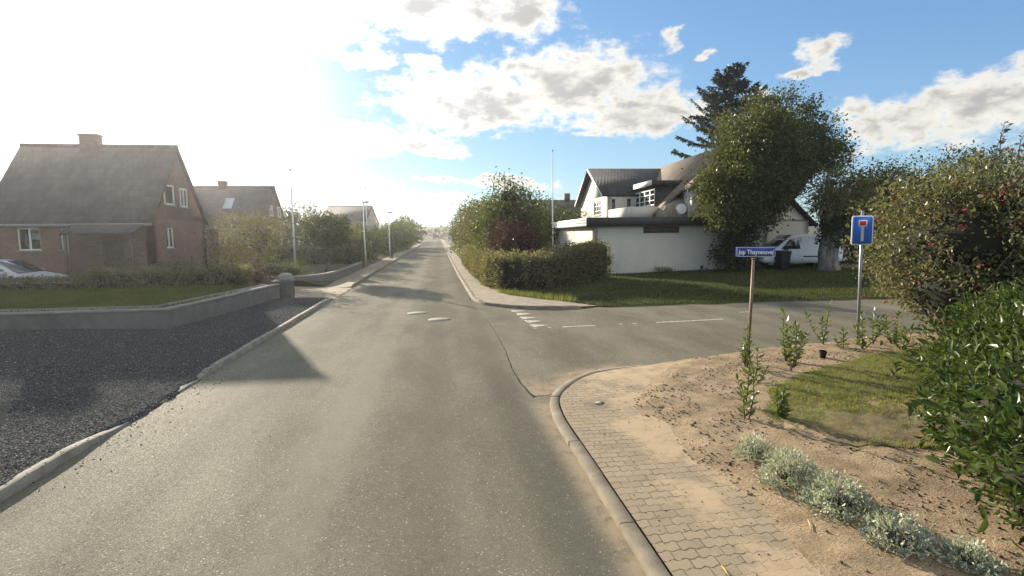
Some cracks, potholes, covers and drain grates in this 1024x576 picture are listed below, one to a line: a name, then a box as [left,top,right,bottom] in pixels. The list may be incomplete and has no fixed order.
crack [488,321,551,397]
